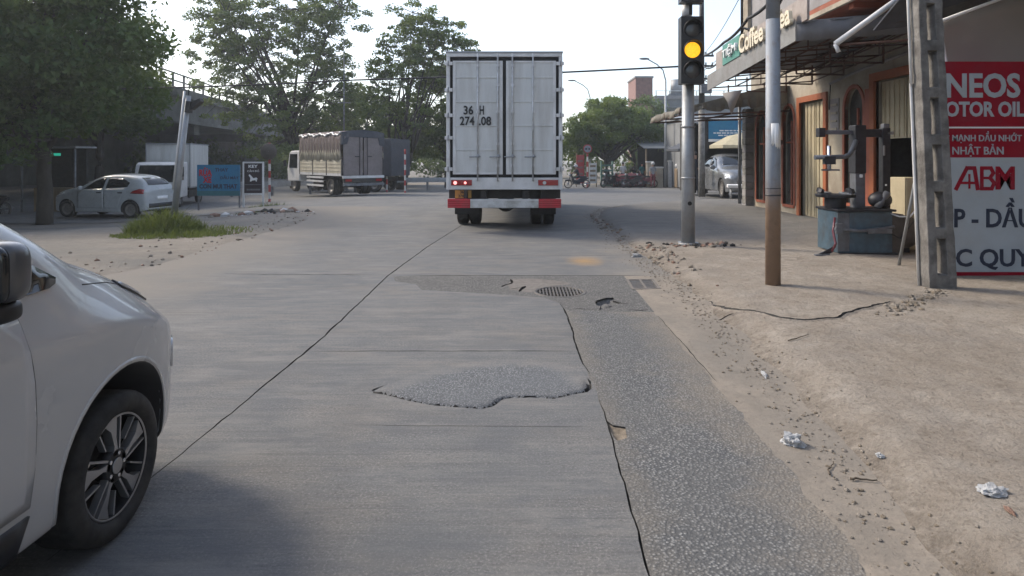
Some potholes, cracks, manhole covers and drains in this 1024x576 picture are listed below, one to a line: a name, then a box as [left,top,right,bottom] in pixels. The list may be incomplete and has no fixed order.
manhole cover [534,286,587,297]
pothole [595,298,621,310]
pothole [607,422,627,441]
